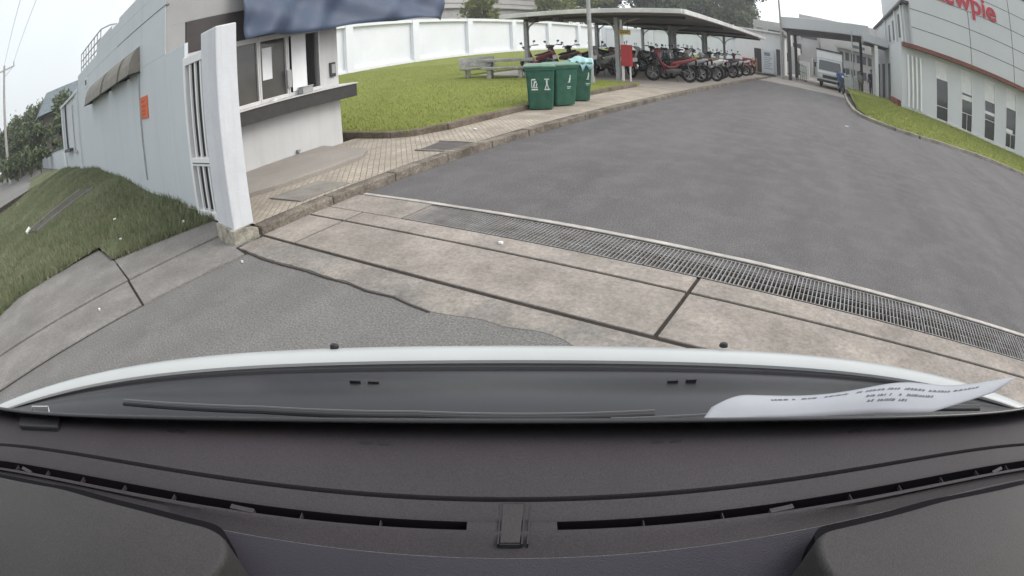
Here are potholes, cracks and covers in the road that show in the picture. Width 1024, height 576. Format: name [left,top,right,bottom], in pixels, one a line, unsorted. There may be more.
drain grate [363,193,1024,361]
